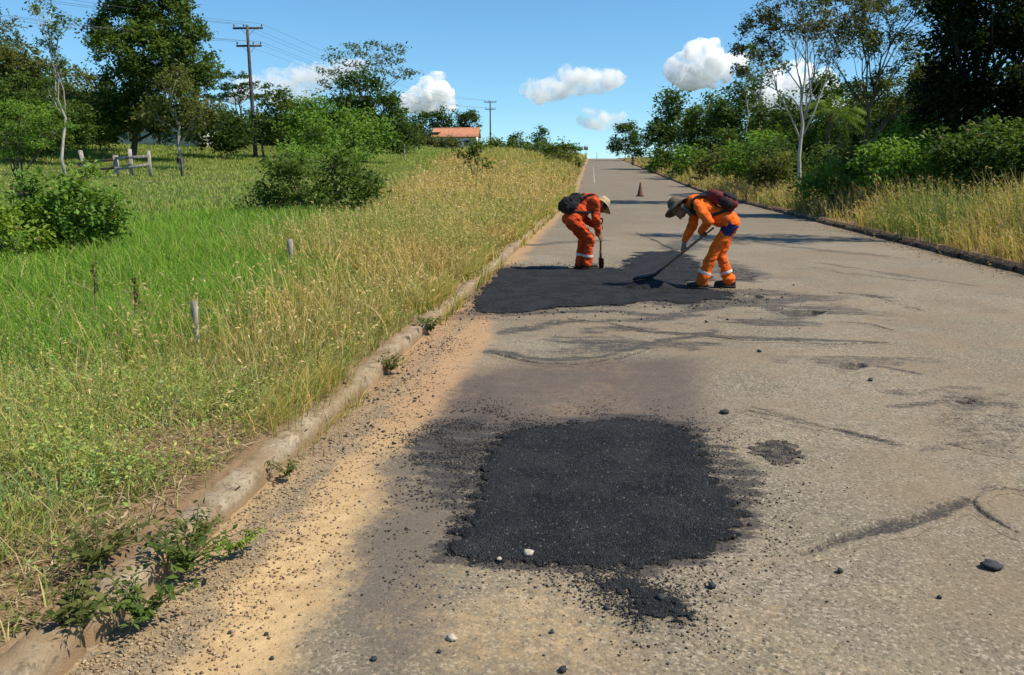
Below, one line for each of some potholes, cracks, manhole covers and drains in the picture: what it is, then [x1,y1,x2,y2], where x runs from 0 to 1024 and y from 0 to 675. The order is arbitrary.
crack [484,267,929,368]
pothole [827,360,879,372]
crack [775,481,1024,576]
